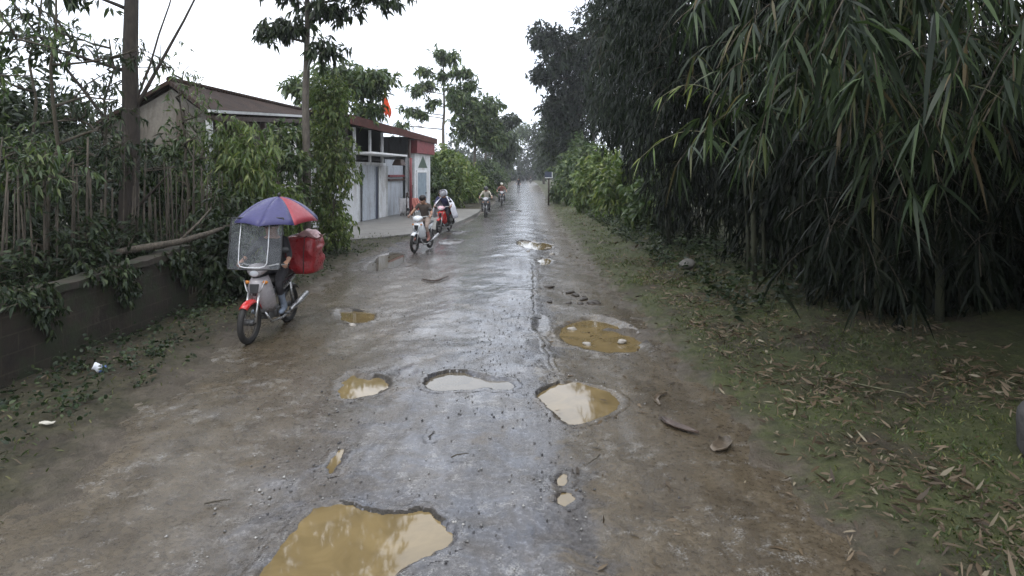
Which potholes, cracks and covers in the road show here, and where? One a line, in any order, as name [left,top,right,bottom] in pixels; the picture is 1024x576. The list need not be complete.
pothole [531,257,558,266]
pothole [328,307,382,324]
pothole [551,314,655,356]
pothole [512,239,557,251]
pothole [314,443,355,479]
pothole [416,368,523,394]
pothole [544,467,579,492]
pothole [326,368,399,402]
pothole [529,378,631,429]
pothole [359,252,411,272]
pothole [237,495,470,576]
crack [536,336,560,373]
